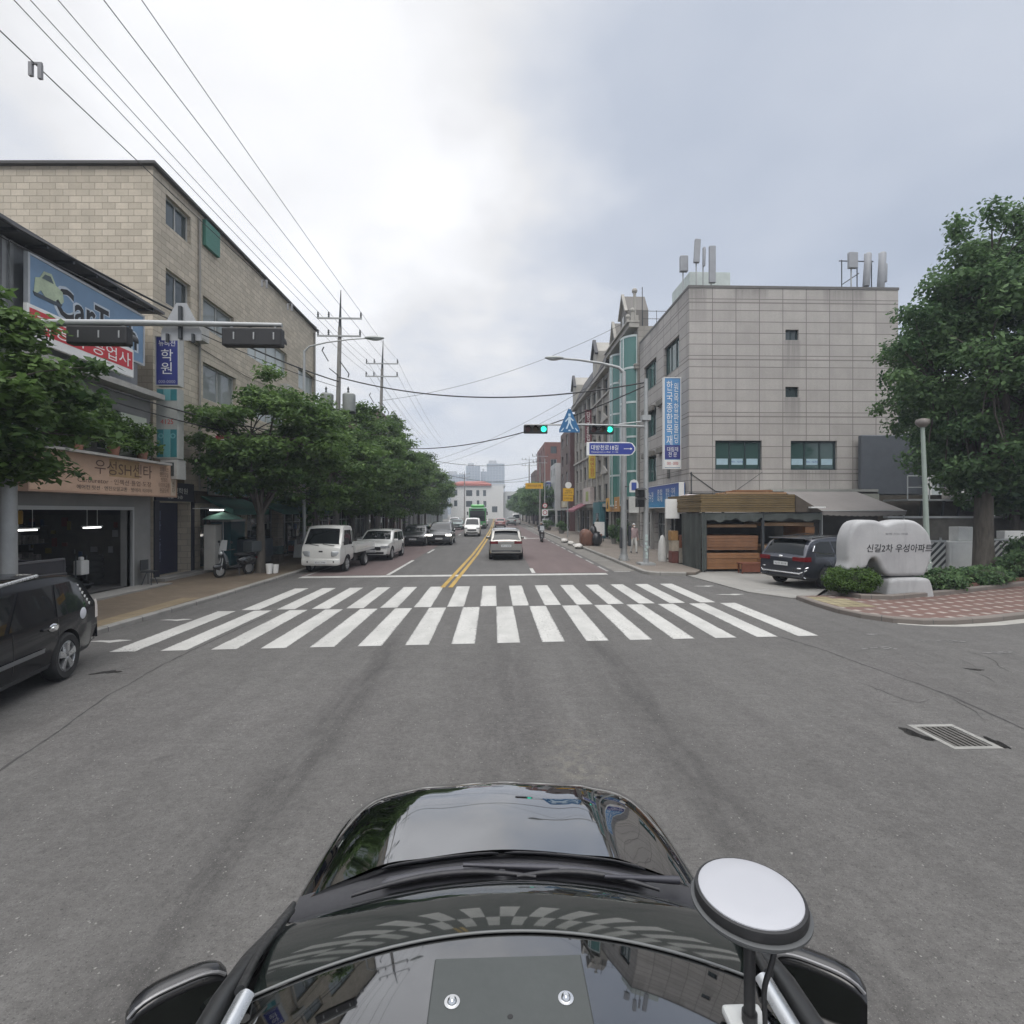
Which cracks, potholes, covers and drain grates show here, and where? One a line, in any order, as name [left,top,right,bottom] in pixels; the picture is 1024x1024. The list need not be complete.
drain grate [908,724,1004,750]
